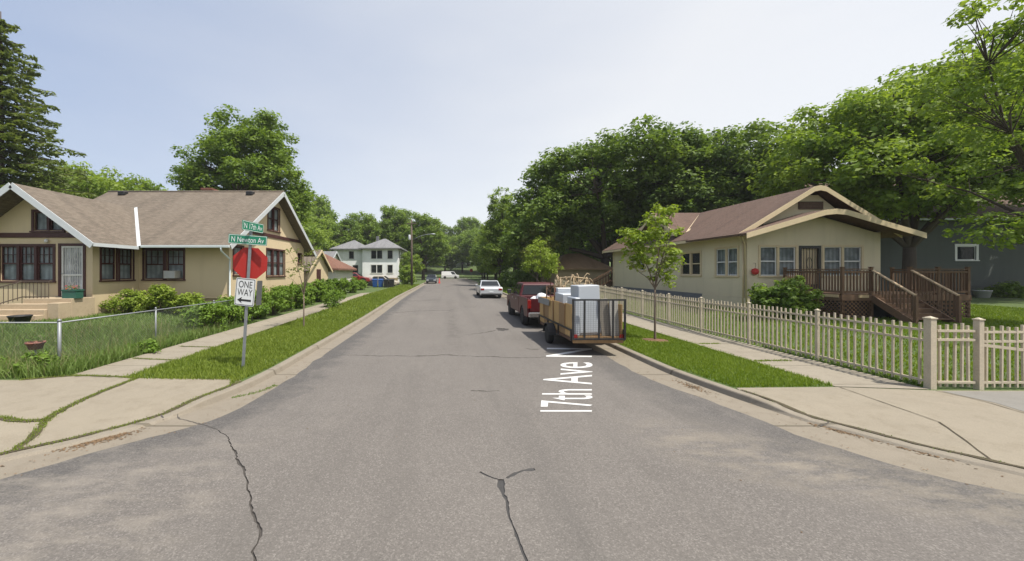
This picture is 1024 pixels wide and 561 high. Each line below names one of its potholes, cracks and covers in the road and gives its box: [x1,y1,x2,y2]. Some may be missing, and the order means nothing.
crack [480,468,535,561]
crack [161,405,263,561]
